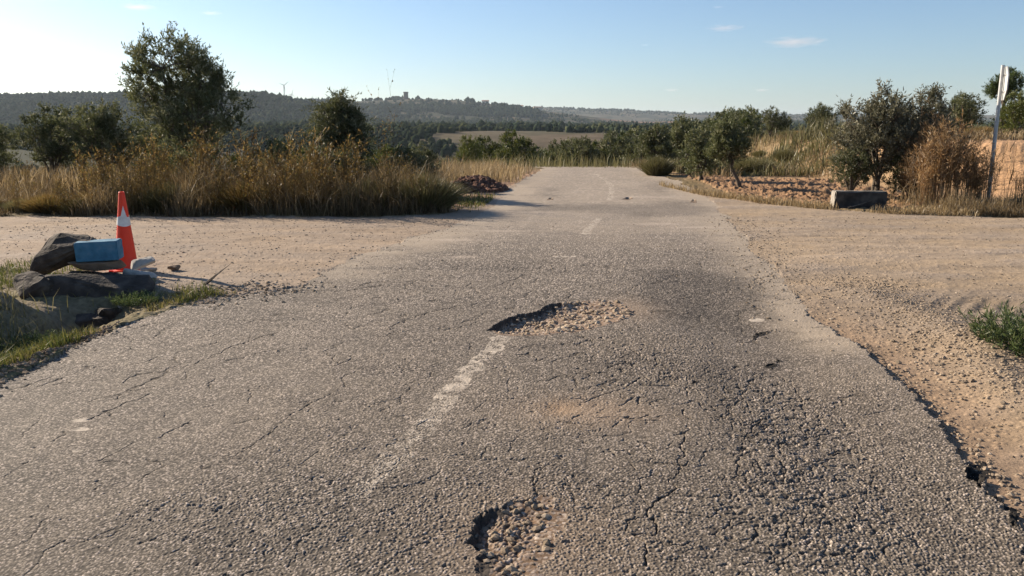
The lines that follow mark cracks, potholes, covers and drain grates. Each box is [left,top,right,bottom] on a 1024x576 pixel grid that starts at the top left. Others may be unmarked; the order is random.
pothole [465,493,568,576]
pothole [964,460,994,488]
pothole [486,300,635,336]
crack [4,263,1024,576]
